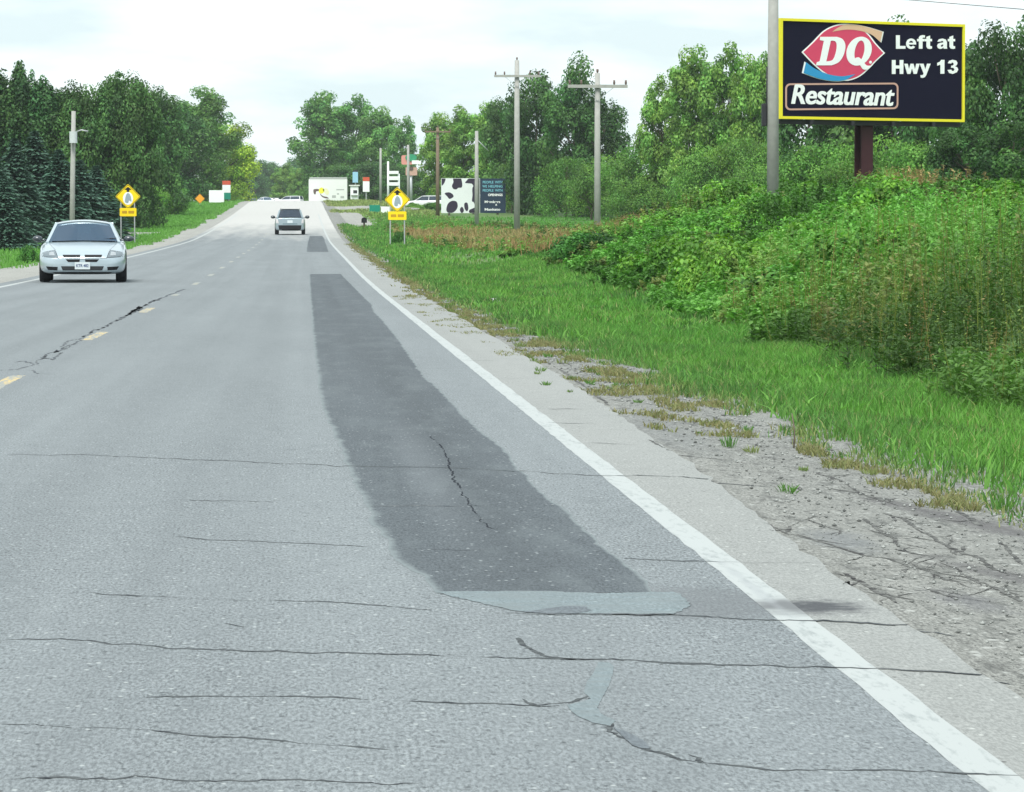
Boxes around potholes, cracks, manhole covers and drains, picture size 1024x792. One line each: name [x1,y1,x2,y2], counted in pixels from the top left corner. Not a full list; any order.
crack [91,592,416,609]
crack [177,536,366,547]
crack [507,472,1024,637]
crack [8,638,1023,776]
crack [6,775,402,785]
crack [10,289,186,374]
crack [13,436,765,529]
